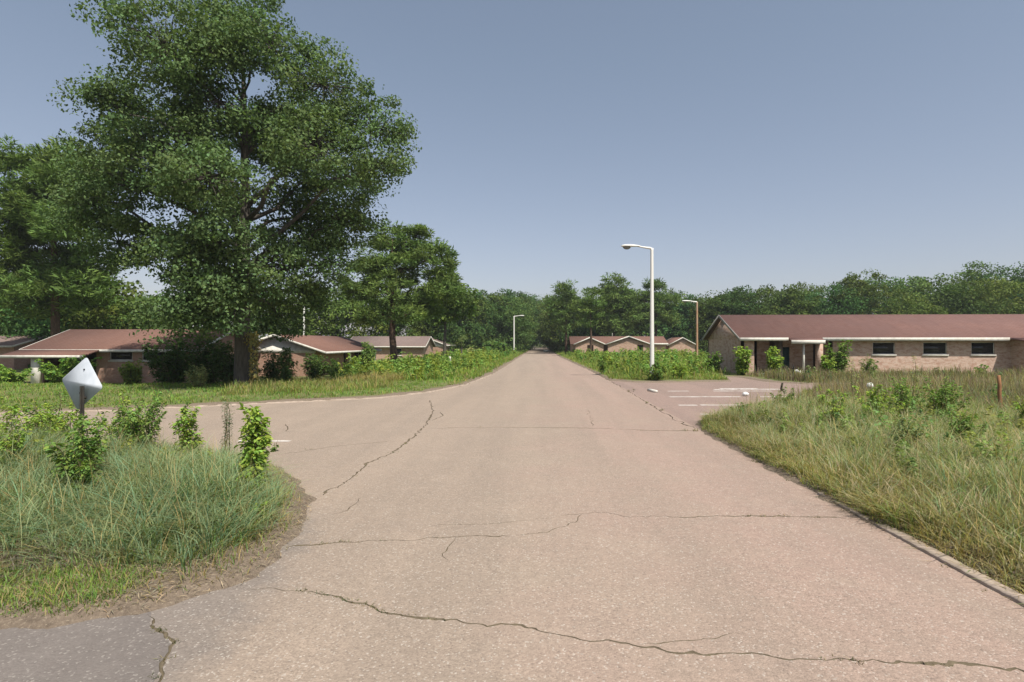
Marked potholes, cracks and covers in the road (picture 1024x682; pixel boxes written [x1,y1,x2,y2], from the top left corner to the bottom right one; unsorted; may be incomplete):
crack [323,400,443,514]
crack [486,413,687,431]
crack [150,616,176,682]
crack [286,512,840,562]
crack [254,588,1024,672]
